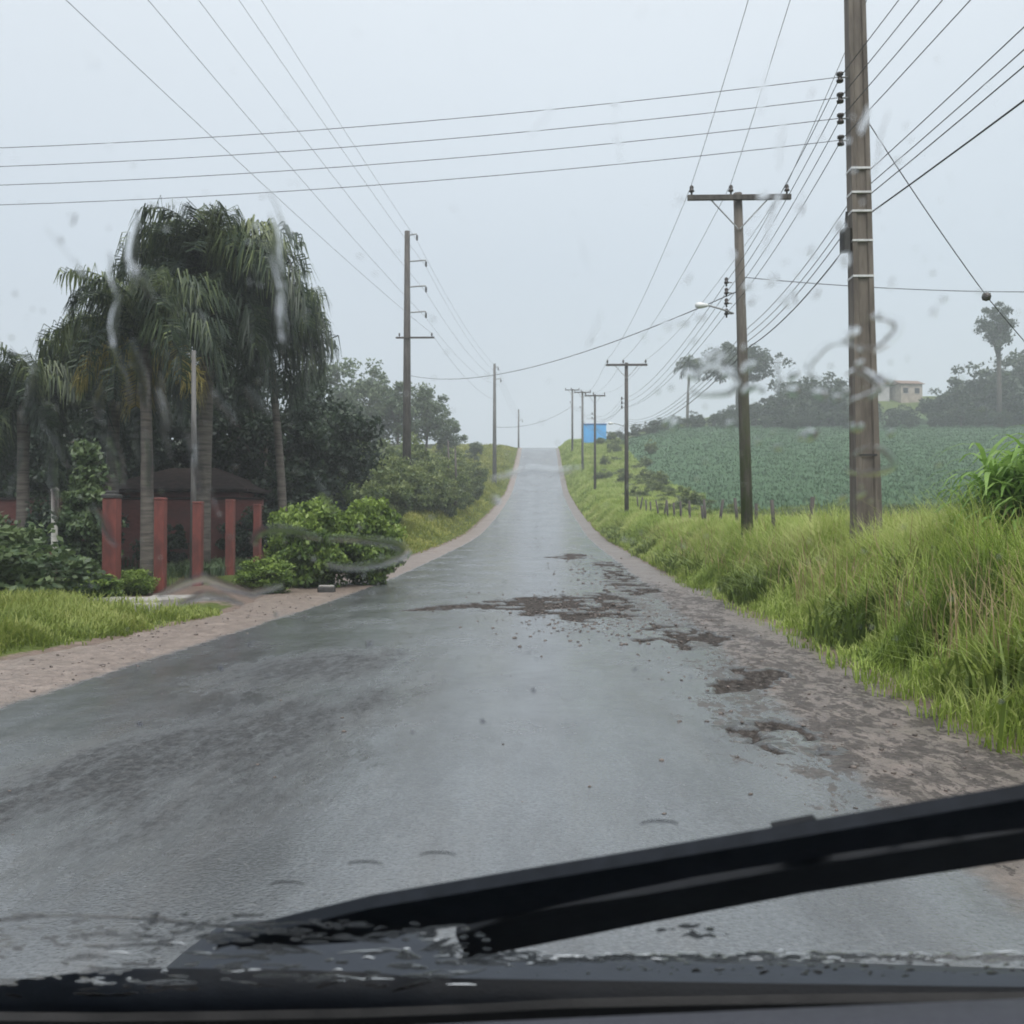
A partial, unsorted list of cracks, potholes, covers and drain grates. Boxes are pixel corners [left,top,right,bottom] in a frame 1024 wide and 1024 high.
pothole [398,592,647,623]
pothole [630,623,733,651]
pothole [704,665,795,695]
pothole [709,717,849,756]
